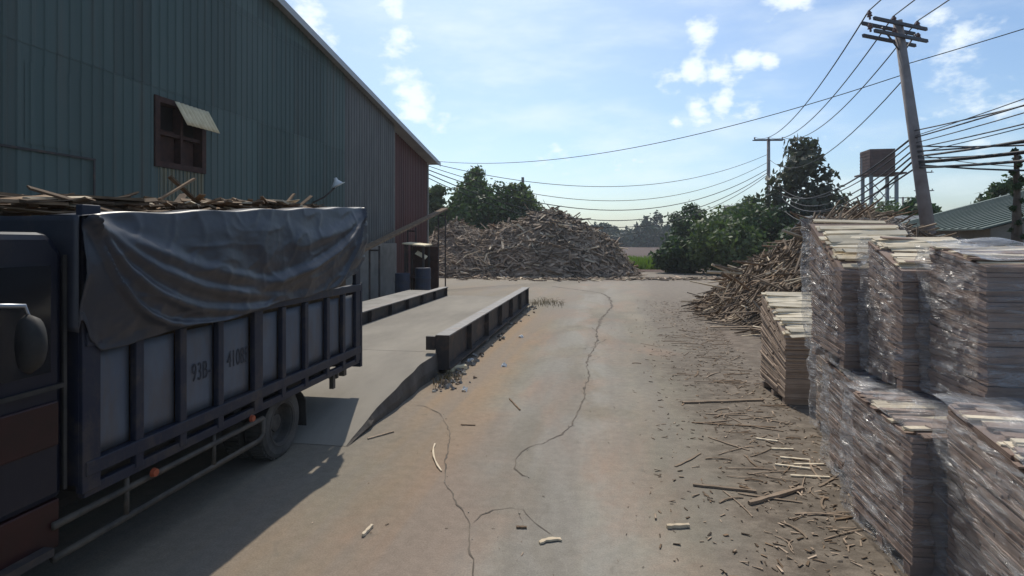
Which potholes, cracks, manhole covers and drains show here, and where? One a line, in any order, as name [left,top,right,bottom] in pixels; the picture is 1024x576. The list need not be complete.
crack [514,286,613,478]
crack [413,404,551,576]
